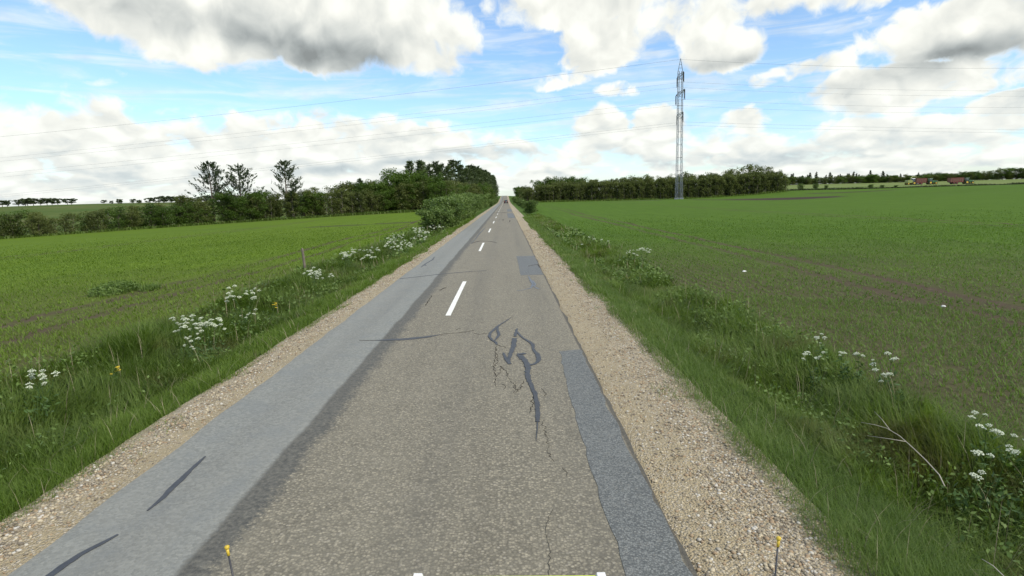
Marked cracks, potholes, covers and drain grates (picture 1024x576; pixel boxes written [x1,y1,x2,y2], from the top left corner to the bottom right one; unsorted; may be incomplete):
crack [493,345,567,475]
